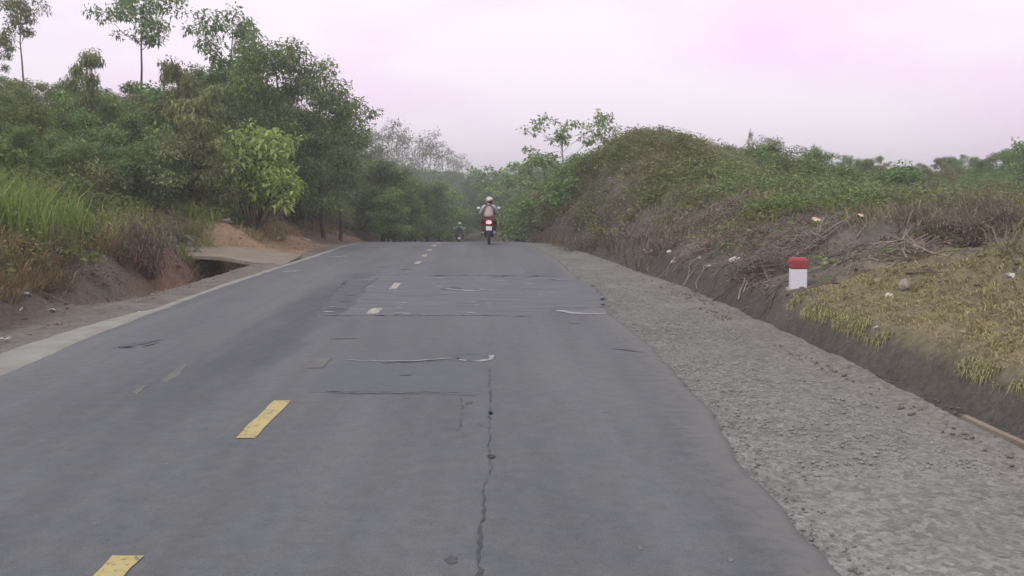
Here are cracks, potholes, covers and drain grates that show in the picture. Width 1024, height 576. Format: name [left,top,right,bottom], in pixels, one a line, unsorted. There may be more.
crack [328,355,494,576]
